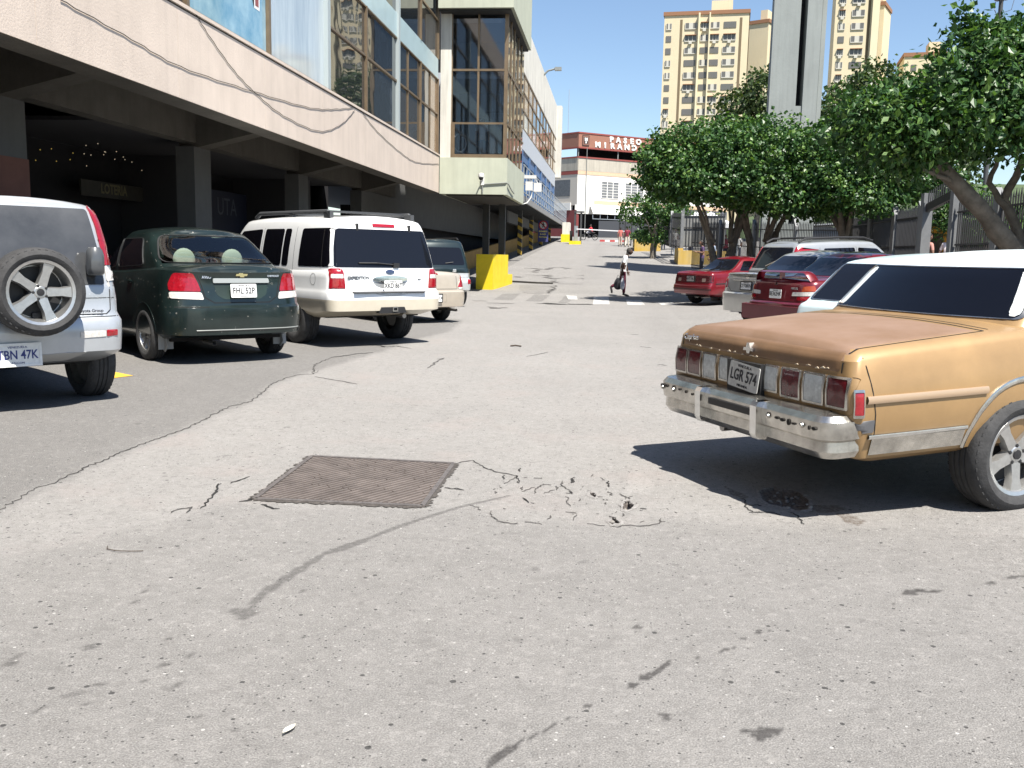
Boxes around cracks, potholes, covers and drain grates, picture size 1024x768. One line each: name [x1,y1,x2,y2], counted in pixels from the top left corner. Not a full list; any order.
manhole cover [248,455,459,508]
crack [444,460,677,527]
crack [0,345,407,510]
pothole [755,486,814,512]
